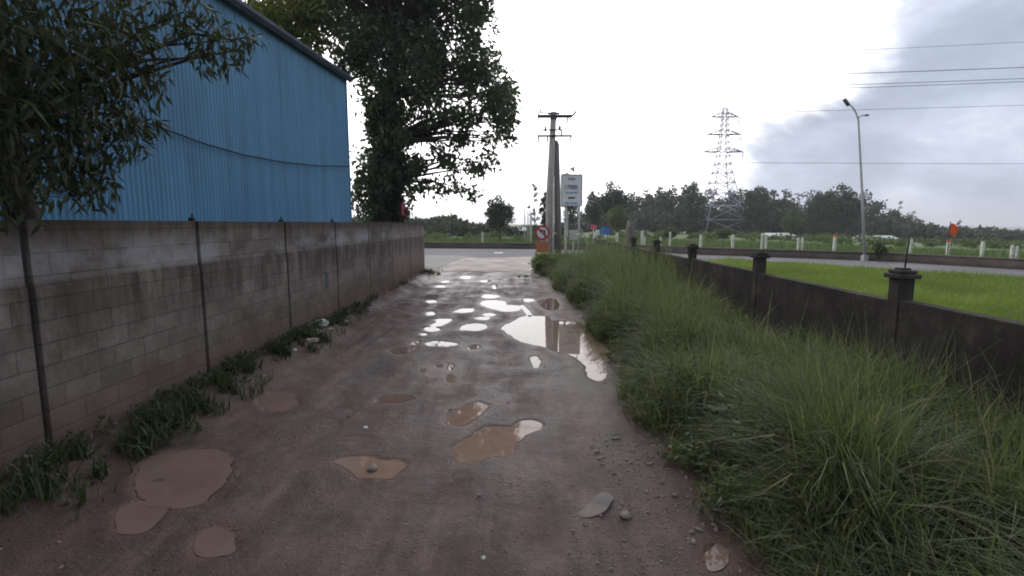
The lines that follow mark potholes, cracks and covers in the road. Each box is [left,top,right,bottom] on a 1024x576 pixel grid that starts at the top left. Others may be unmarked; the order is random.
pothole [256,391,301,412]
pothole [442,402,491,426]
pothole [500,315,610,381]
pothole [449,420,544,463]
pothole [107,498,175,536]
pothole [329,454,410,481]
pothole [389,346,420,355]
pothole [194,459,248,509]
pothole [187,524,242,558]
pothole [129,449,237,511]
